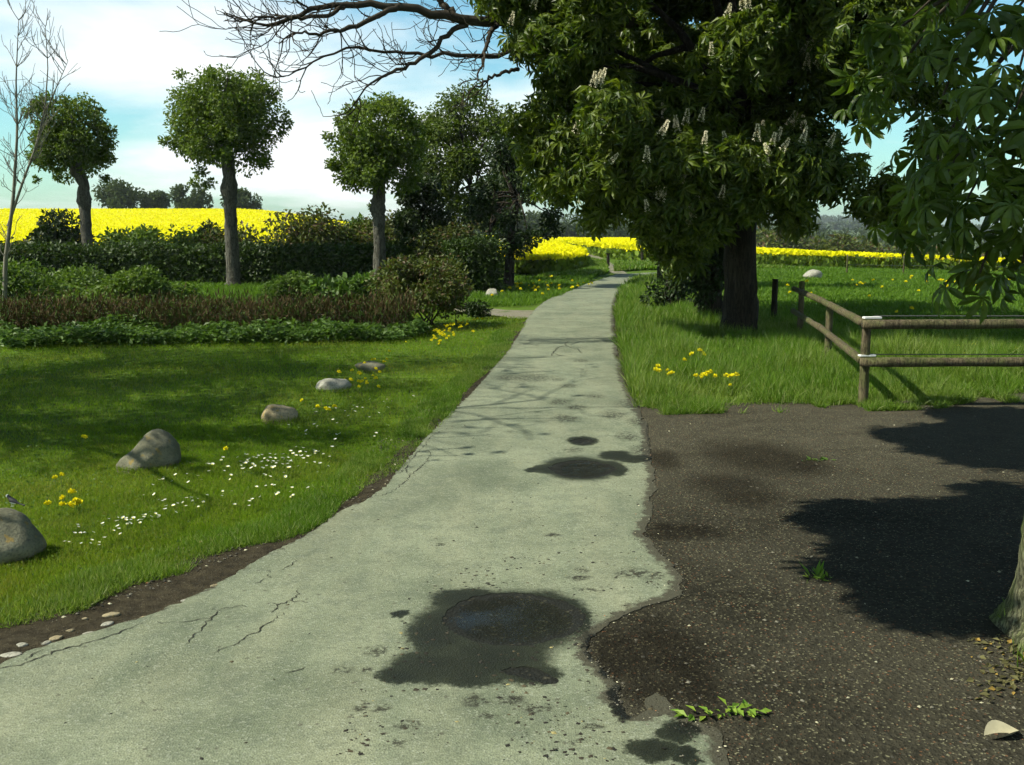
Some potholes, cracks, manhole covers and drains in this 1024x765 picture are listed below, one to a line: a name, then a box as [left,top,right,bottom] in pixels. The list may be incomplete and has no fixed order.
crack [217,589,304,652]
crack [1,623,140,668]
pothole [549,460,617,479]
crack [375,426,451,496]
pothole [442,593,586,646]
crack [157,605,244,644]
